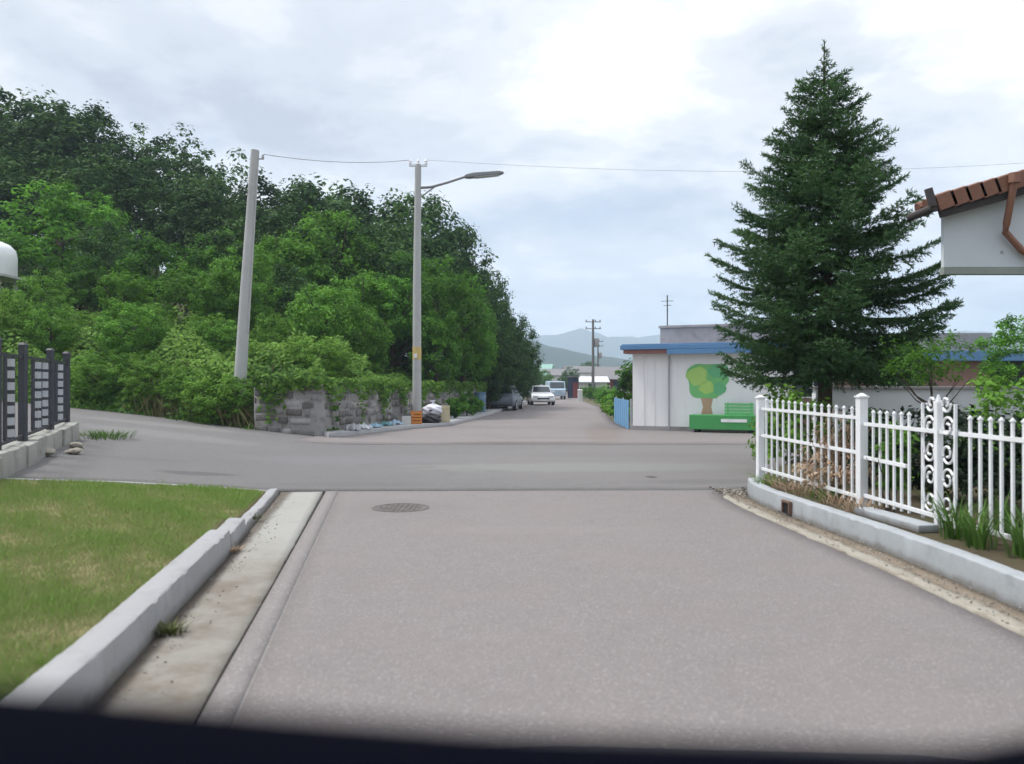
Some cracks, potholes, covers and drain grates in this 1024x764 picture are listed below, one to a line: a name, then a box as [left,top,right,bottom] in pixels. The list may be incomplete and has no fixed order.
manhole cover [372,503,429,512]
